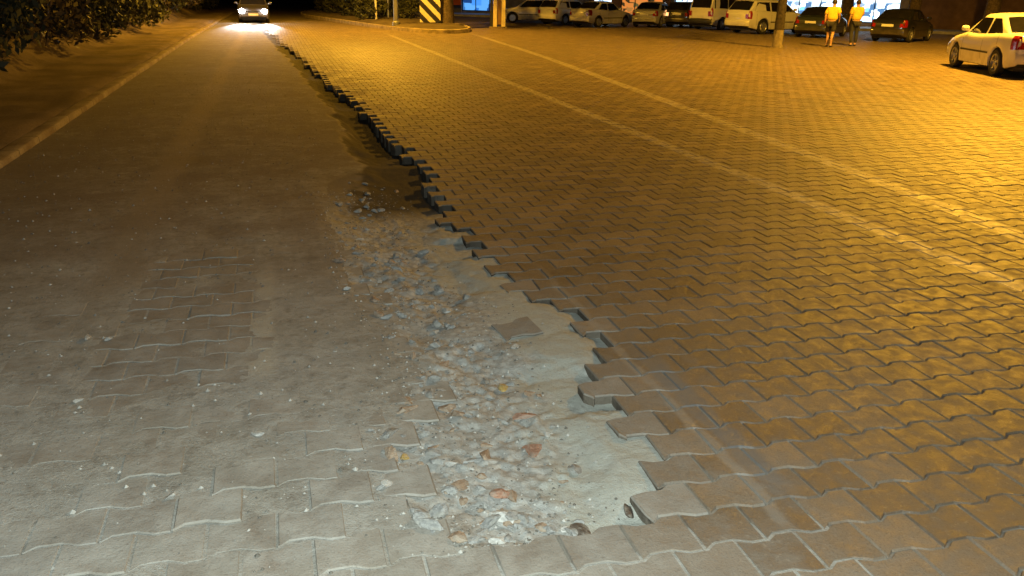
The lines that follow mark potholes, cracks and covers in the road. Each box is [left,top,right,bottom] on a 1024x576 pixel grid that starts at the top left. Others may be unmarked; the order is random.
pothole [323,169,443,221]
pothole [325,217,670,547]
